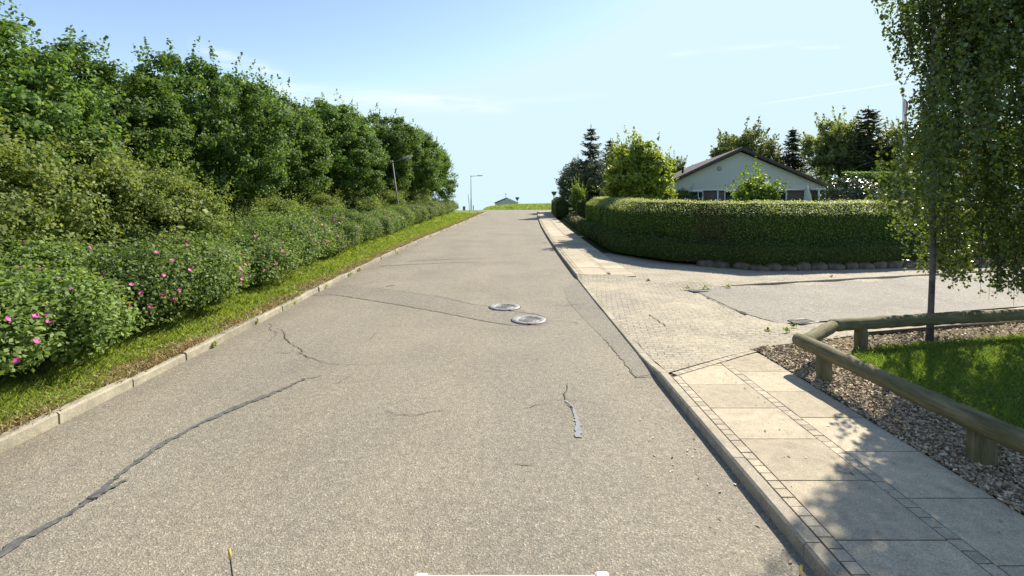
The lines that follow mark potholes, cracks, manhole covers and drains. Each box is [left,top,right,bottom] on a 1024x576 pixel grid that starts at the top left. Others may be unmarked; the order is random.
manhole cover [511,315,547,325]
manhole cover [488,303,521,311]
crack [269,328,367,384]
